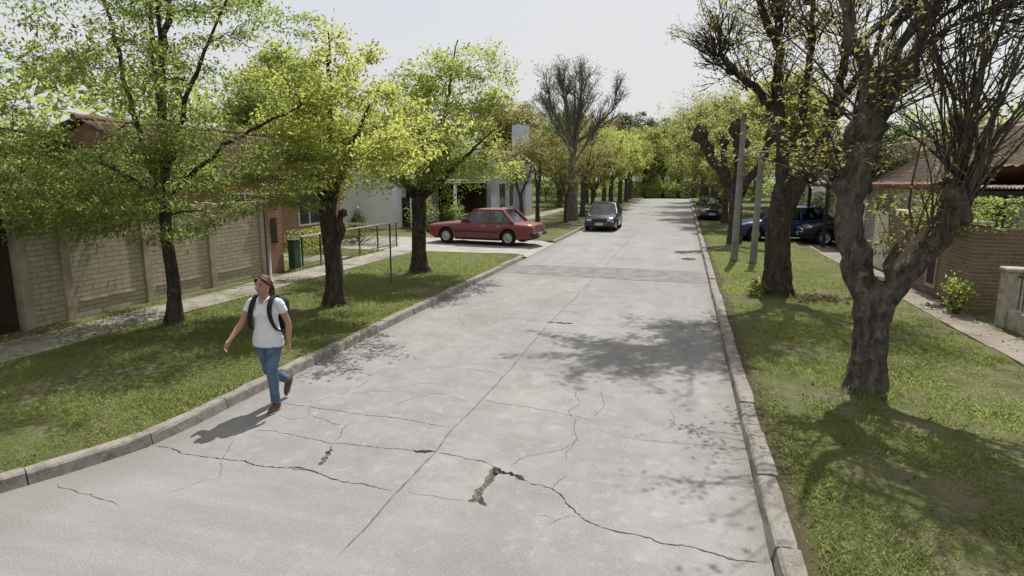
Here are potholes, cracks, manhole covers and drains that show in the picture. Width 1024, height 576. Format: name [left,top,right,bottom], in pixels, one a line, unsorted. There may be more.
crack [458,312,583,333]
pothole [468,468,502,506]
crack [152,380,761,563]
crack [57,484,117,505]
